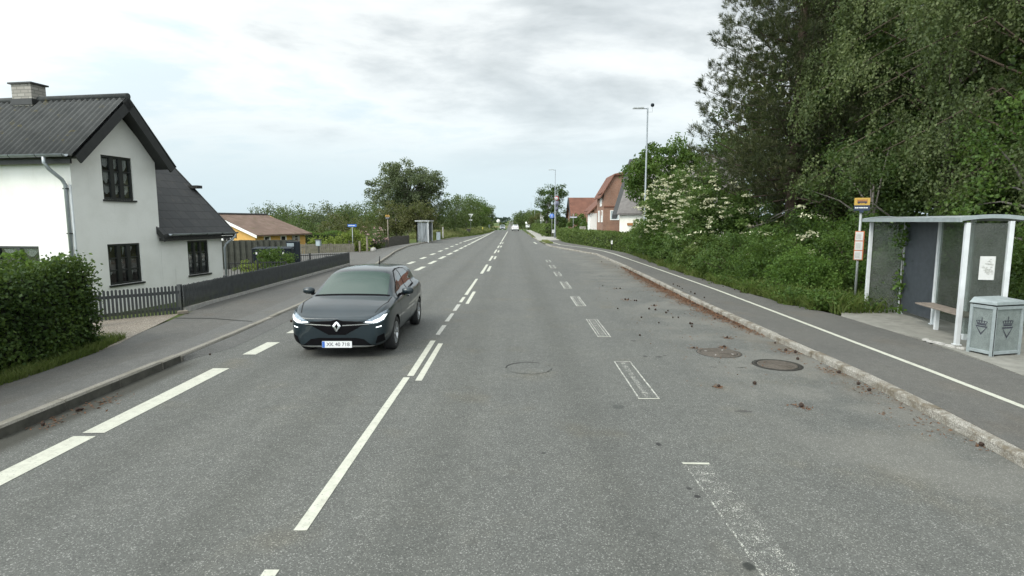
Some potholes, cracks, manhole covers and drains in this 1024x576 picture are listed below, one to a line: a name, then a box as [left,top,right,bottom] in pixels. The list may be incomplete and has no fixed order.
manhole cover [696,348,742,358]
manhole cover [505,362,552,374]
manhole cover [752,359,804,371]
